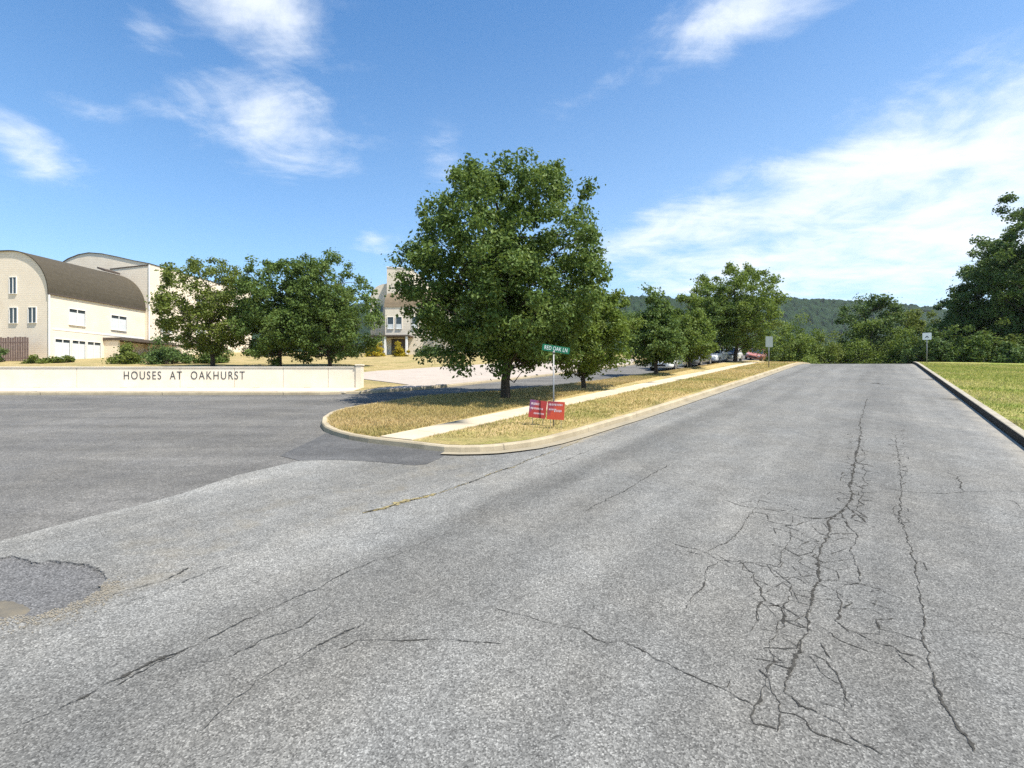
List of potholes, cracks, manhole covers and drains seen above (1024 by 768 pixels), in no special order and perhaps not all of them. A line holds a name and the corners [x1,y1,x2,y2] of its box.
crack [114,565,224,605]
pothole [0,555,139,638]
crack [496,400,1018,758]
crack [177,605,501,735]
